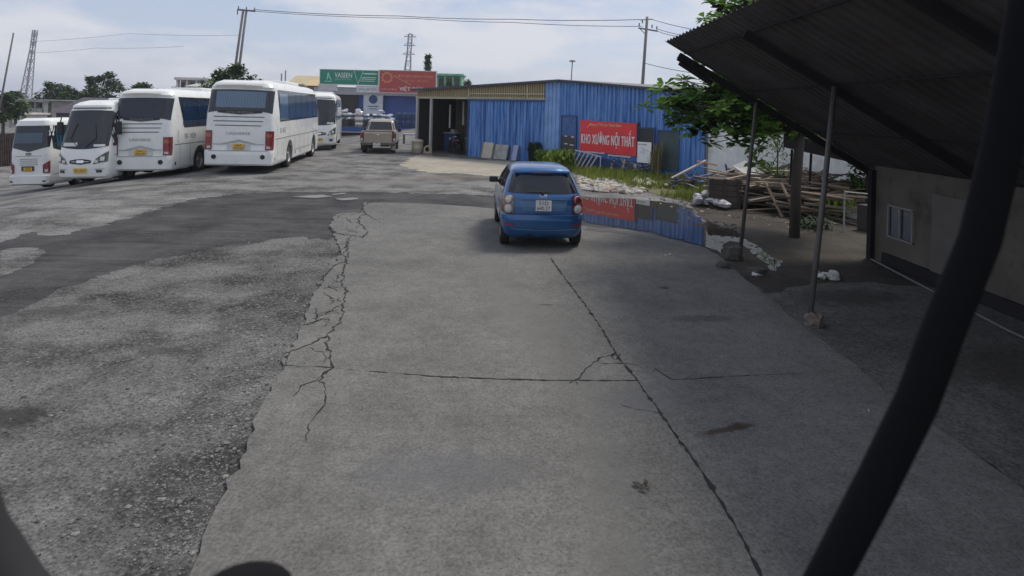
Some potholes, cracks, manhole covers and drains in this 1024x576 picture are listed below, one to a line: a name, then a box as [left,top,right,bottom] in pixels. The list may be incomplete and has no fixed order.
crack [282,200,380,440]
crack [570,350,635,385]
